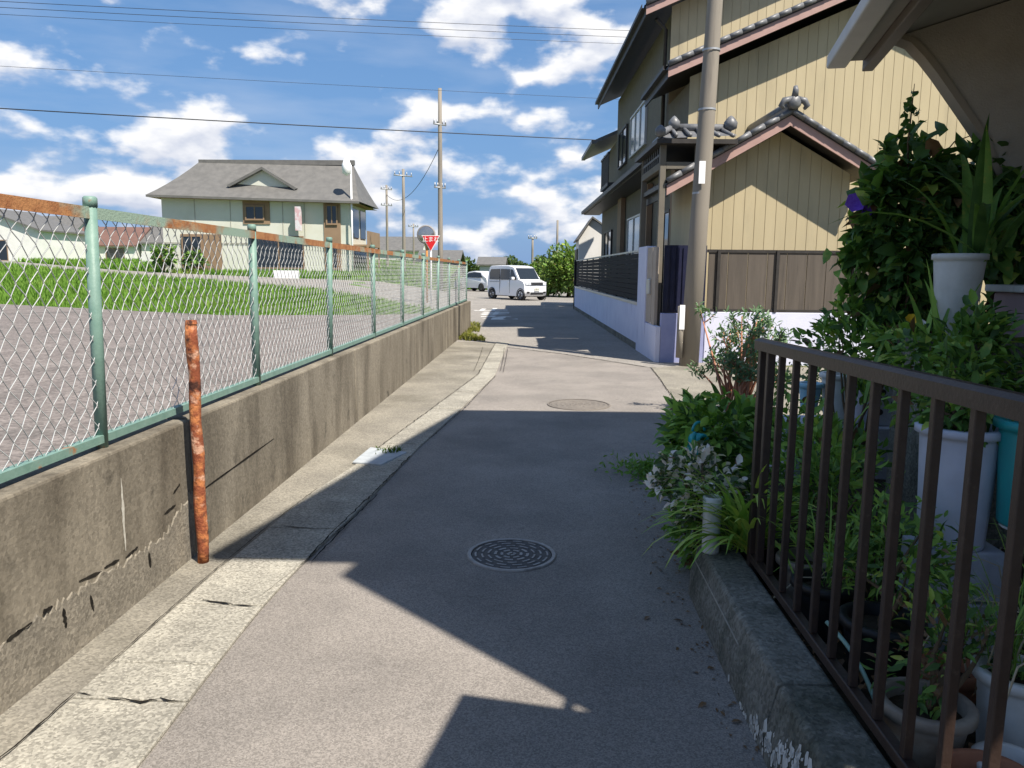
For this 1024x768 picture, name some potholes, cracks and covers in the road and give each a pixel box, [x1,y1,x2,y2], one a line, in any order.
manhole cover [467,538,556,572]
manhole cover [547,399,610,411]
